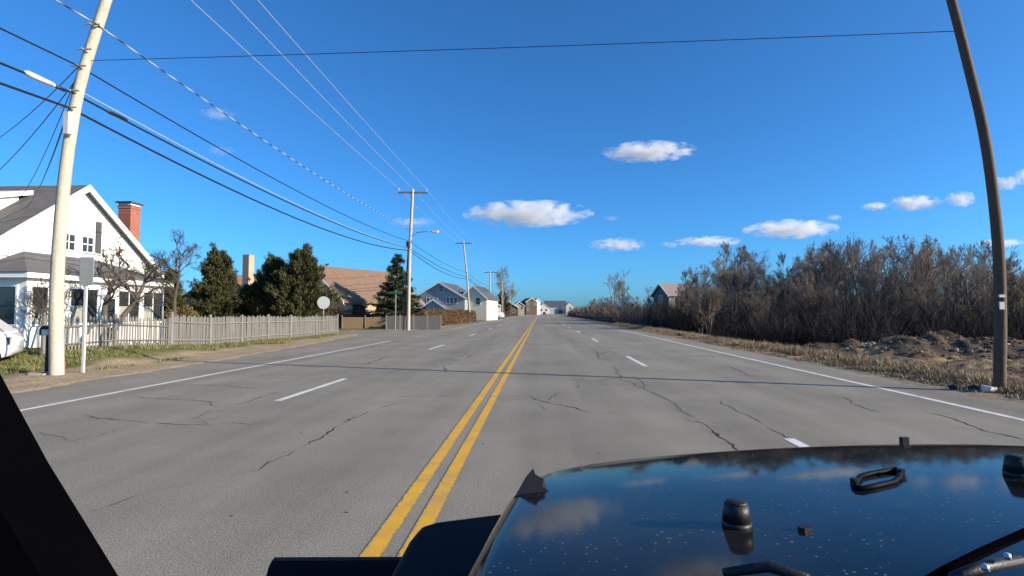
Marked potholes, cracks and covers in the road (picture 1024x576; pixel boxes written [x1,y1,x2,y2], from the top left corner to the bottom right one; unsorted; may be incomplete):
crack [232,351,738,476]
crack [39,378,286,441]
